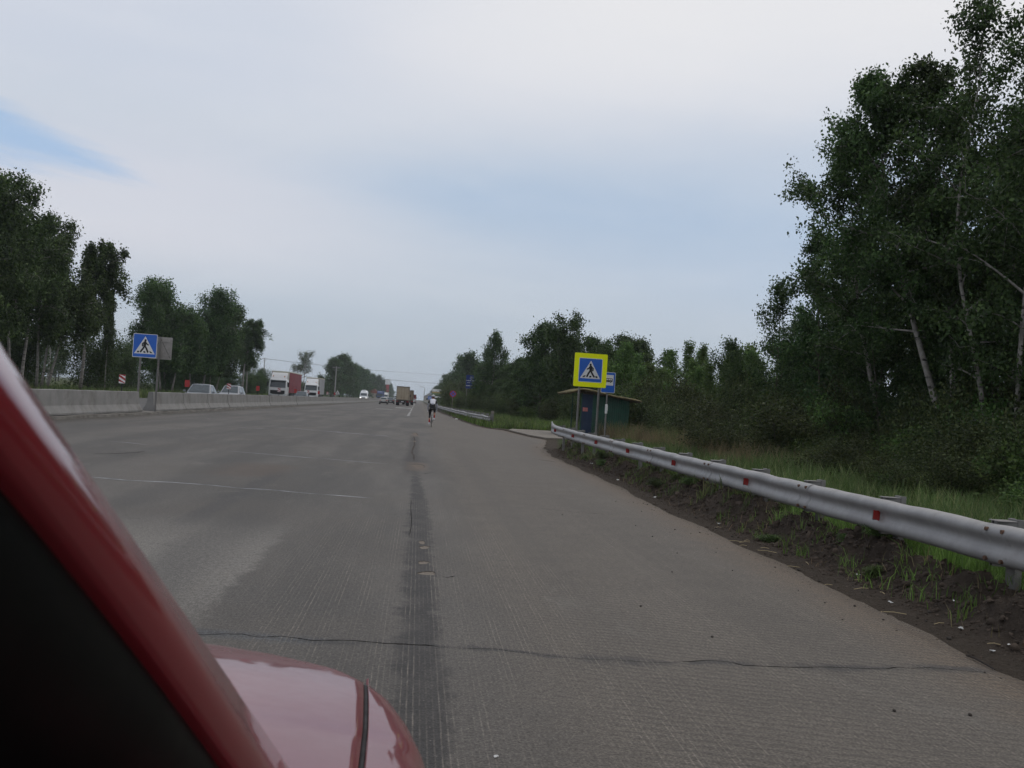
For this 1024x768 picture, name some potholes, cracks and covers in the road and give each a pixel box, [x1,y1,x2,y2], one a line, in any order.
crack [199,634,979,672]
